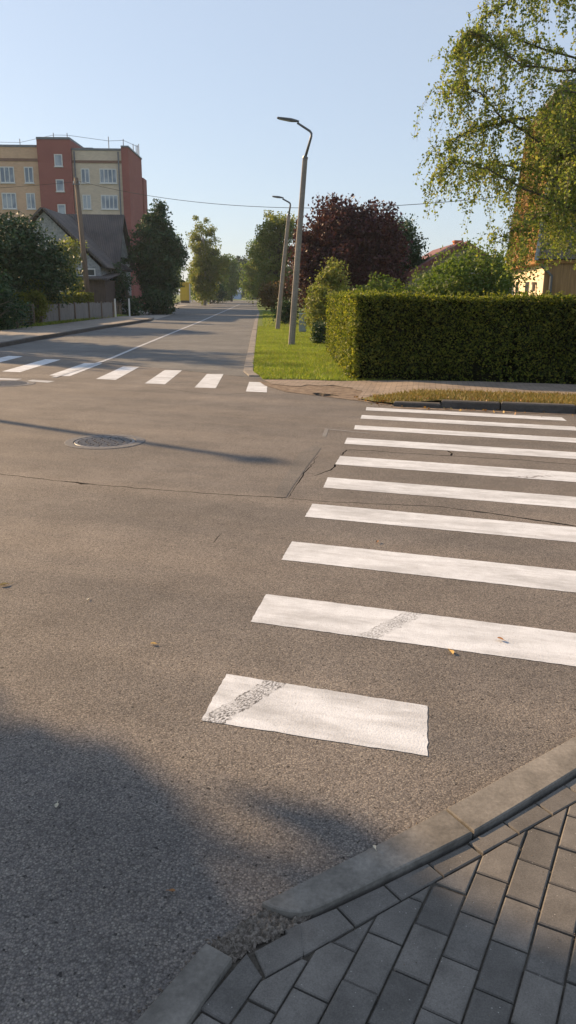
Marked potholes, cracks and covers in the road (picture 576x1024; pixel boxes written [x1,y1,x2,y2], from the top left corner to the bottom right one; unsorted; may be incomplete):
manhole cover [64,434,145,449]
crack [290,450,575,496]
crack [2,474,574,526]
